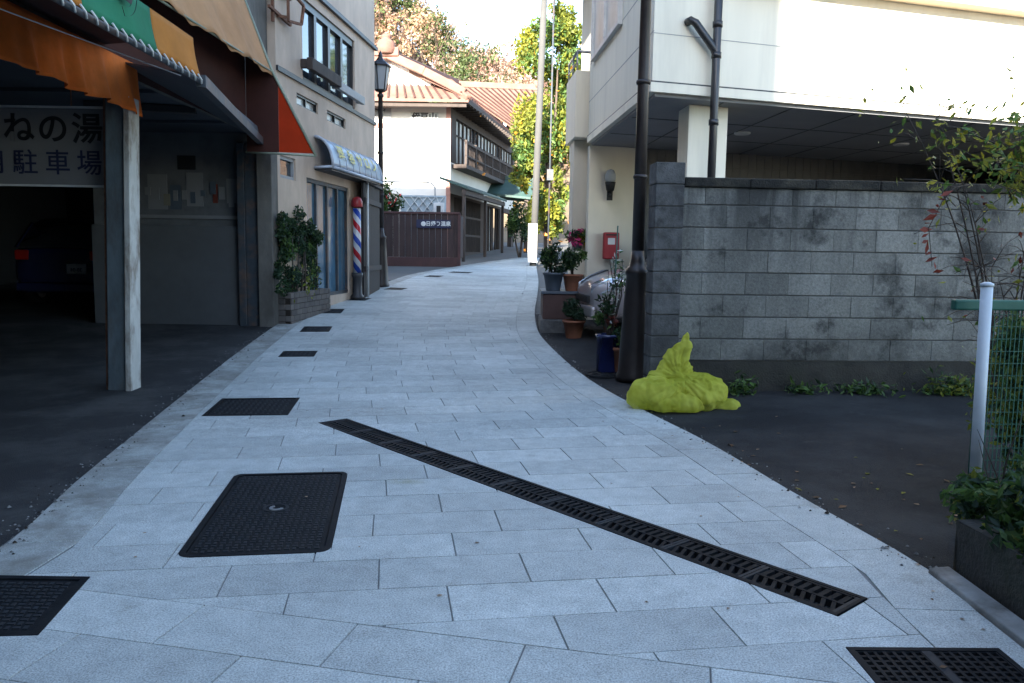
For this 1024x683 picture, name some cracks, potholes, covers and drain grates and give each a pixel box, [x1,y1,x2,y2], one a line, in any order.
drain grate [846,647,1024,683]
manhole cover [202,397,300,416]
manhole cover [175,472,348,558]
manhole cover [0,575,90,636]
drain grate [318,418,867,616]
